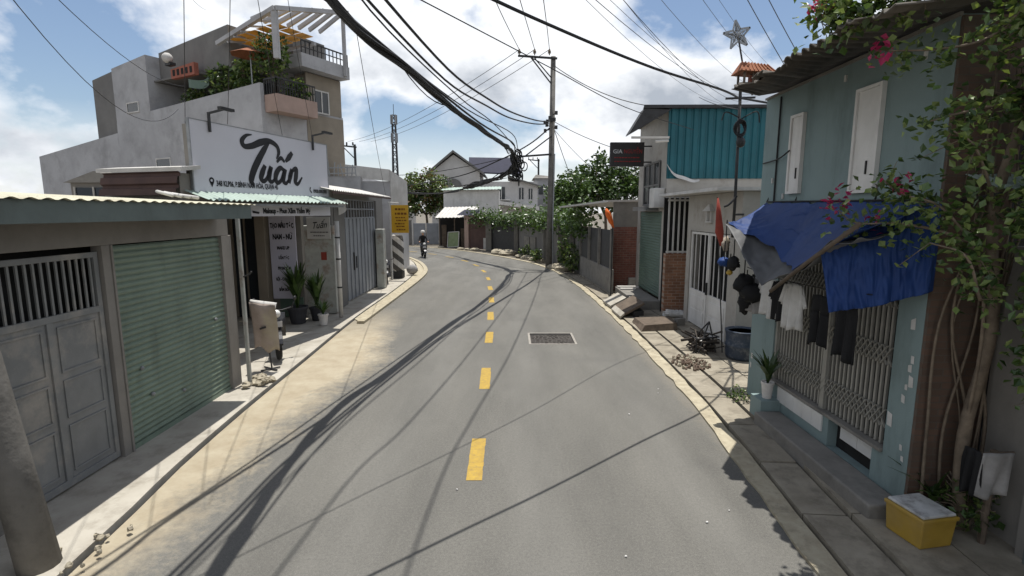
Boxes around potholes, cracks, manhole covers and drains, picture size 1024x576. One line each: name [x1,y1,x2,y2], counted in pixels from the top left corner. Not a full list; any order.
manhole cover [528,333,577,344]
